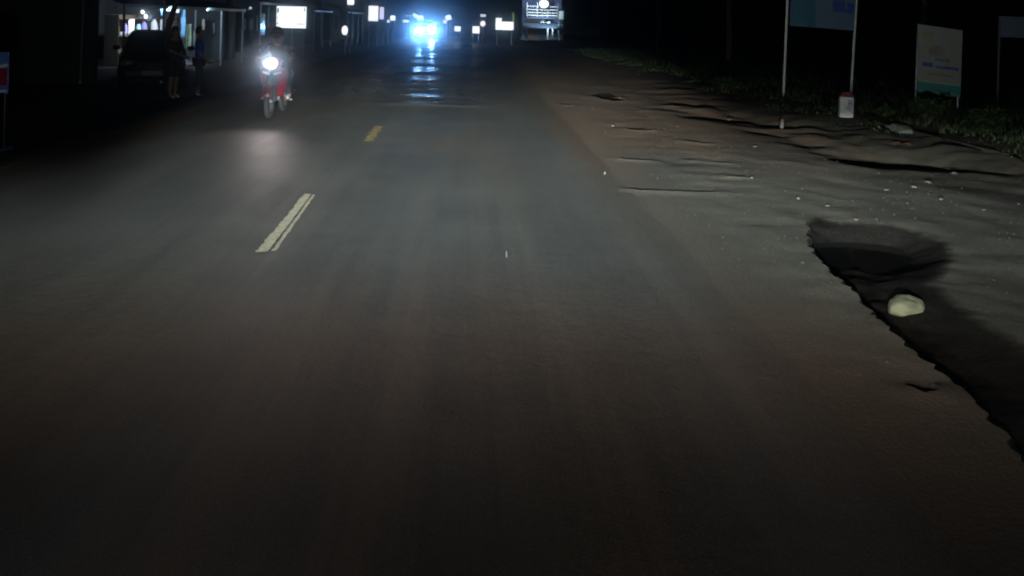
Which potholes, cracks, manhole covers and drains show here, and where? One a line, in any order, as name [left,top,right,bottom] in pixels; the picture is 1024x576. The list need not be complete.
pothole [590,93,625,101]
pothole [803,215,1024,463]
